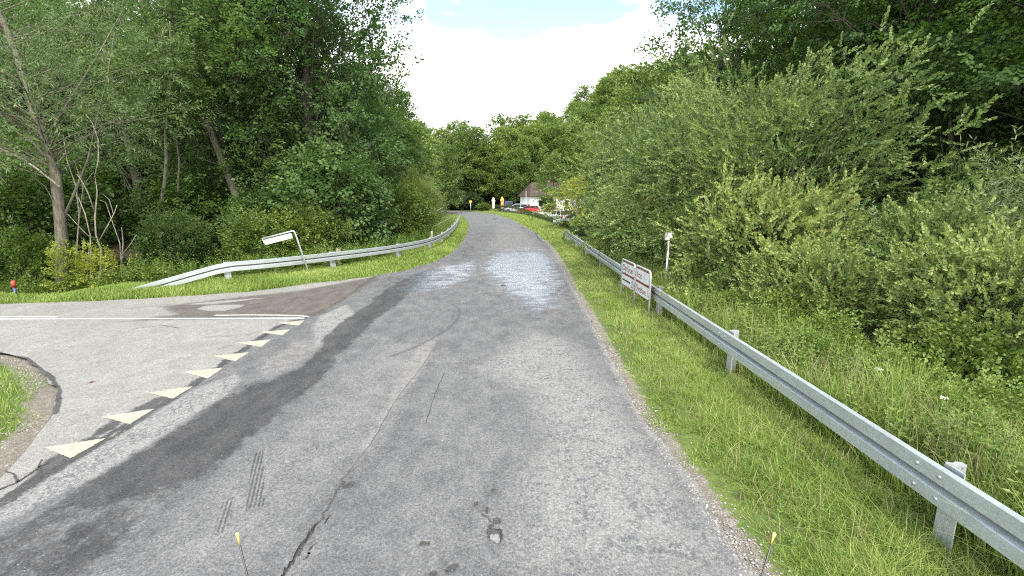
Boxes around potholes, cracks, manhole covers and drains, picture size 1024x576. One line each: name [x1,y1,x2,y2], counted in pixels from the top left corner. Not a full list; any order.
pothole [482,524,508,547]
pothole [488,514,505,529]
